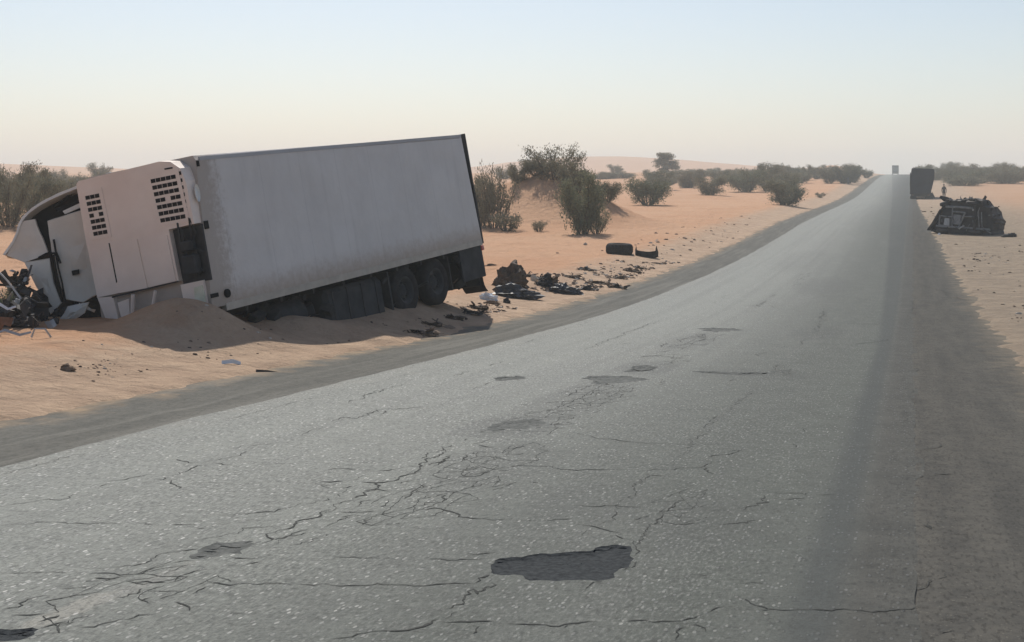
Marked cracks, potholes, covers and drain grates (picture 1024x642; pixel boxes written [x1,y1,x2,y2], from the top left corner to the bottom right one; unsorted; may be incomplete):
crack [2,334,953,640]
pothole [491,545,634,581]
pothole [0,627,39,642]
pothole [189,541,255,559]
pothole [583,375,649,385]
